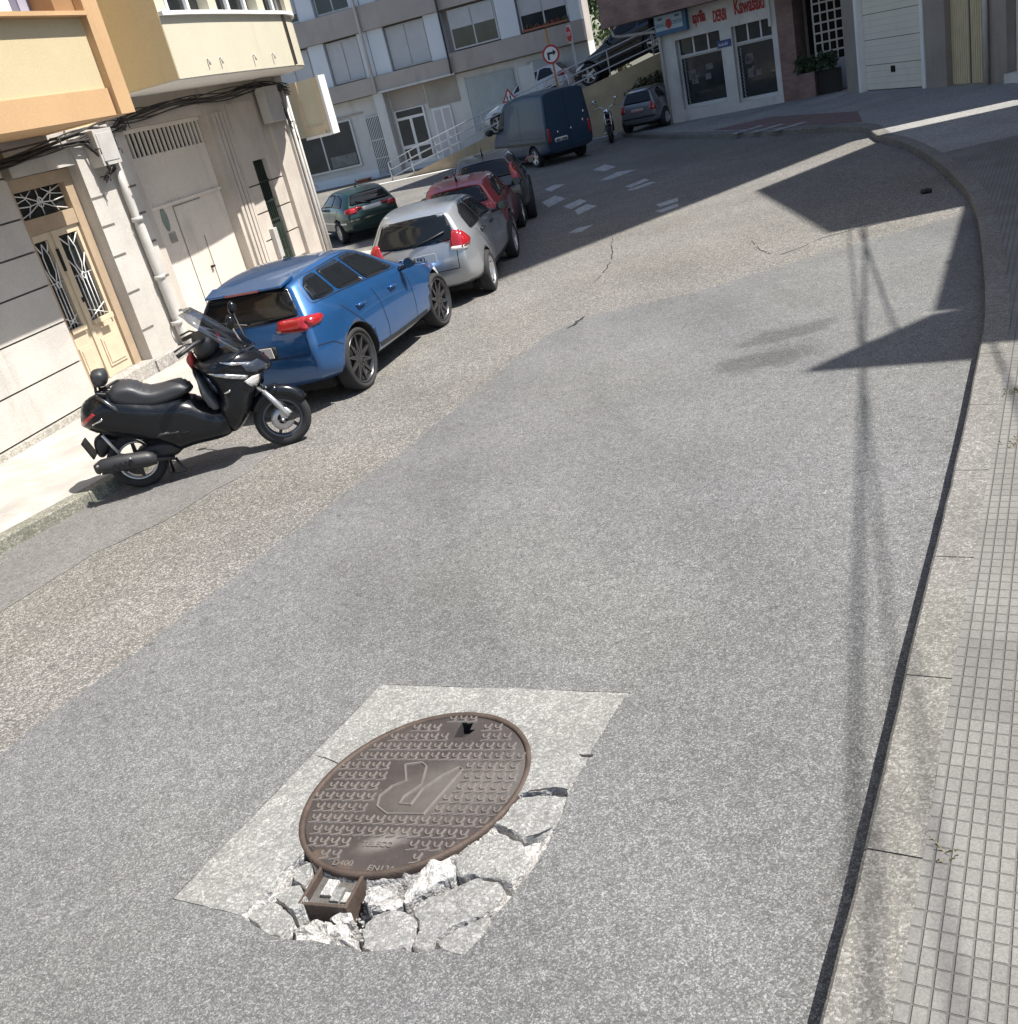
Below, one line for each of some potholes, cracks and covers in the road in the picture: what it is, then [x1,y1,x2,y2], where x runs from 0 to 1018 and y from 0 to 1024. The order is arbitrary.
manhole cover [298,712,531,923]
pothole [243,796,554,948]
